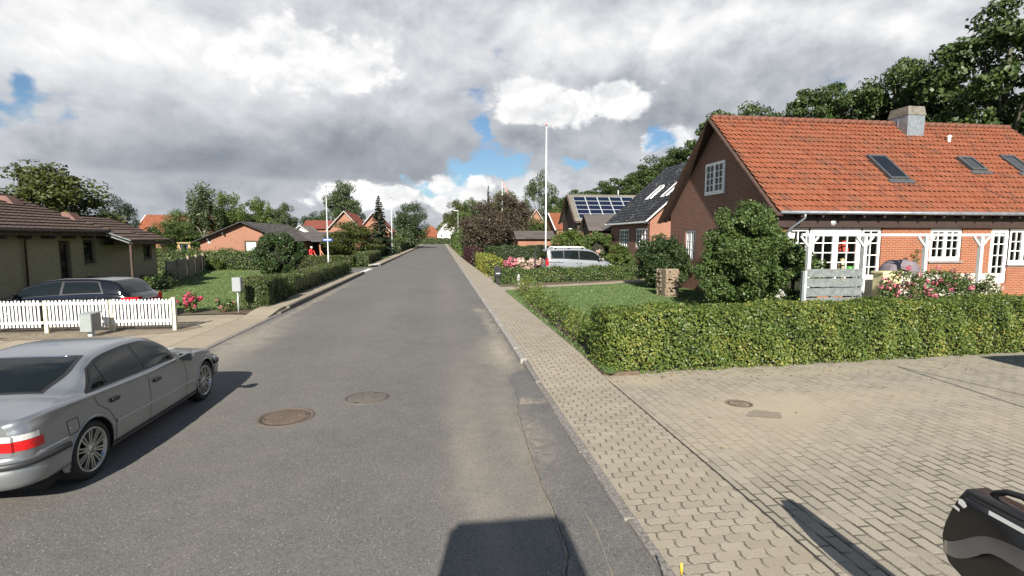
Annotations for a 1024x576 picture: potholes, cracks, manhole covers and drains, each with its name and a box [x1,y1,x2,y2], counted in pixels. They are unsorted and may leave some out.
manhole cover [344,391,389,405]
manhole cover [256,408,315,427]
manhole cover [725,399,754,408]
